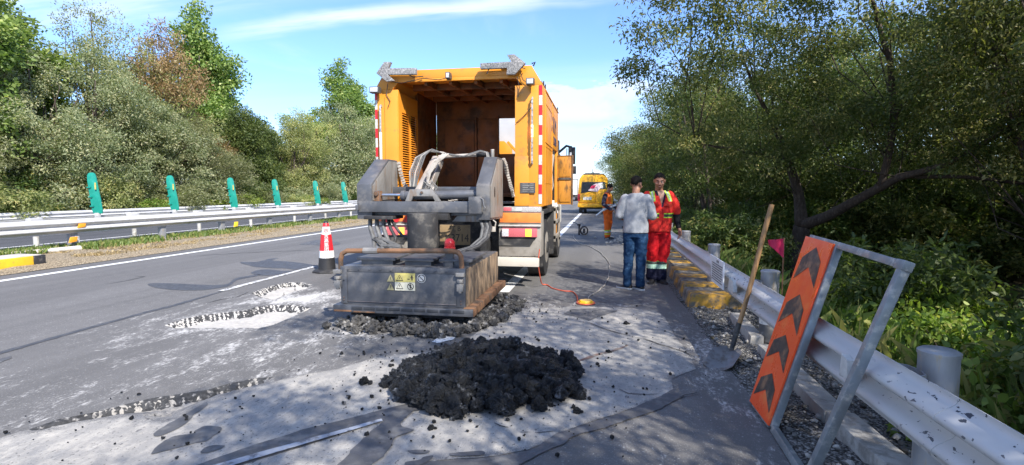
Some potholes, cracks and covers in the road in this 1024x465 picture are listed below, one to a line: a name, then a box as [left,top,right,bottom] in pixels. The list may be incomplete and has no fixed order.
crack [579,323,694,361]
pothole [165,305,311,328]
pothole [251,282,314,300]
pothole [25,377,275,432]
